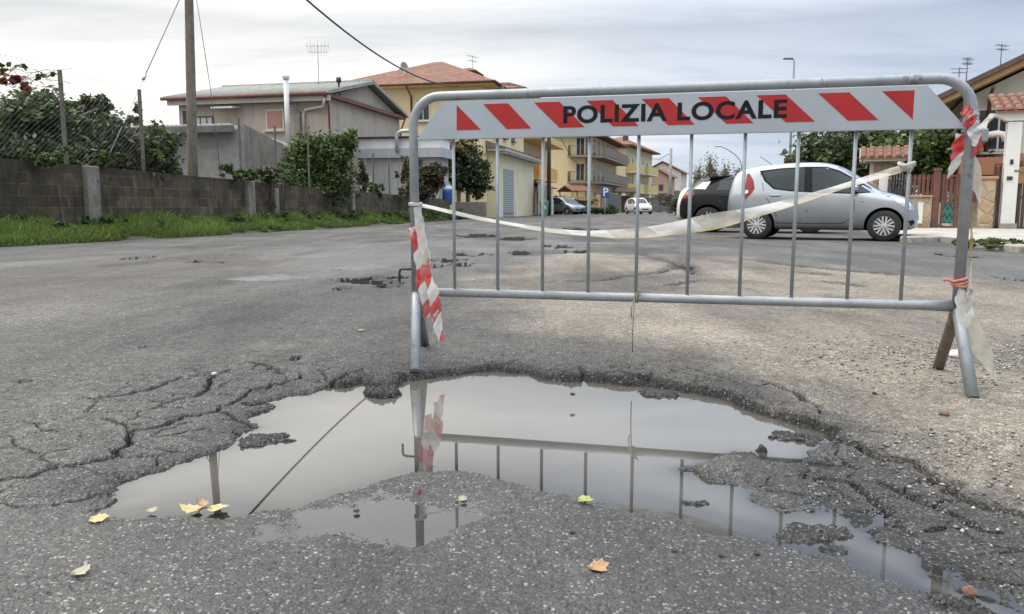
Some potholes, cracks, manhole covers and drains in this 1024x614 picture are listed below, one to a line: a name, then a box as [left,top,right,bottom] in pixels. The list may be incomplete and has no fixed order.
pothole [74,363,1023,614]
crack [641,373,1024,612]
pothole [327,276,368,284]
crack [0,359,966,587]
crack [544,252,710,286]
pothole [365,274,411,283]
